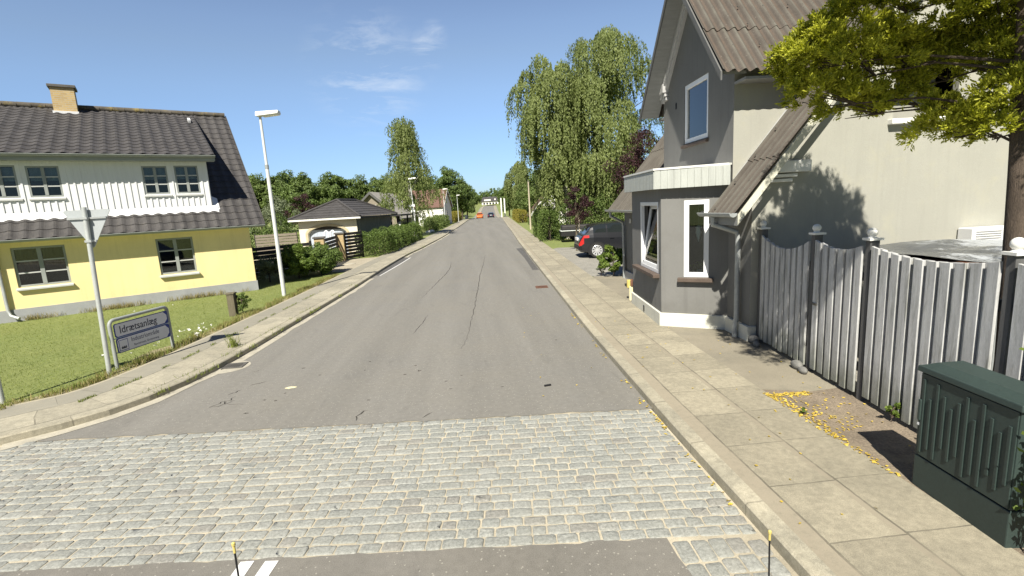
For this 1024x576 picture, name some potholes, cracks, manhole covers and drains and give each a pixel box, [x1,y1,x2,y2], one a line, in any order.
crack [211,370,263,407]
